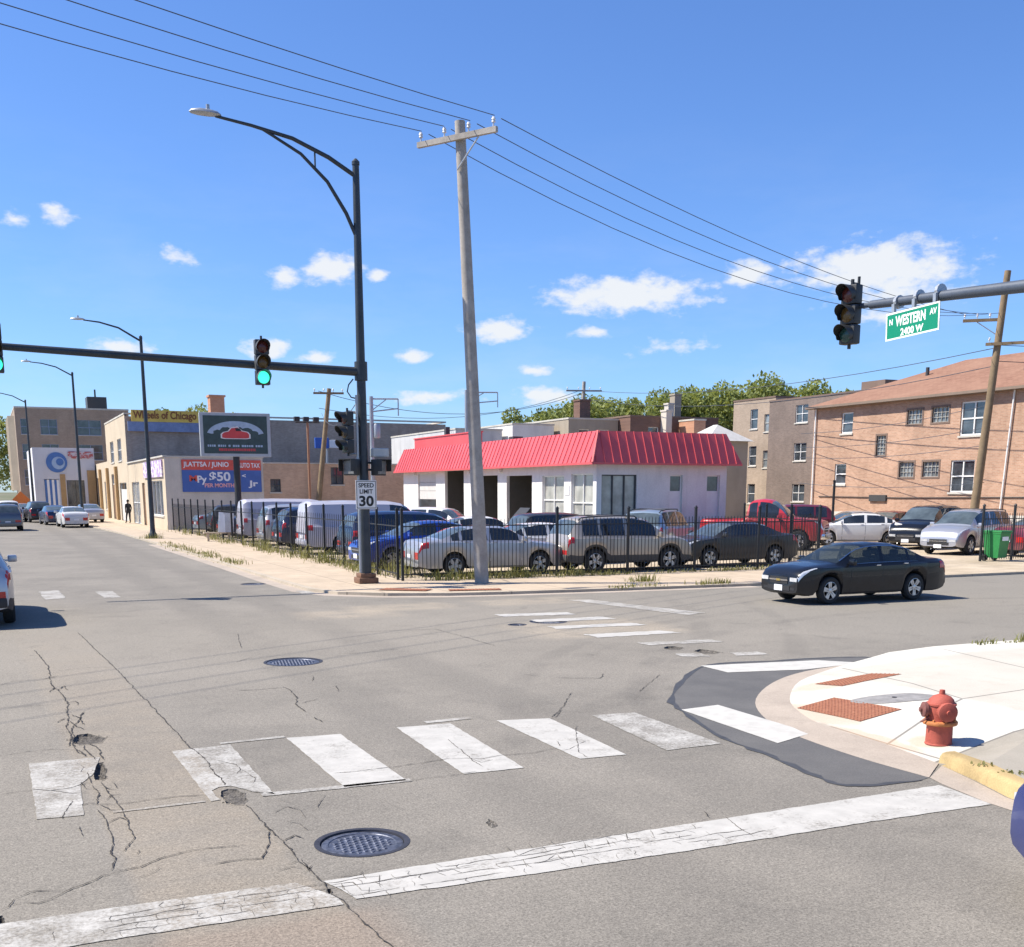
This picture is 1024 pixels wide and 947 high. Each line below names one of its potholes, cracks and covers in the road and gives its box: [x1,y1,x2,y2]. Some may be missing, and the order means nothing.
pothole [92,762,107,781]
crack [1,650,243,910]
manhole cover [314,828,410,858]
crack [525,674,603,756]
pothole [220,789,248,806]
pothole [66,733,107,745]
manhole cover [263,657,323,666]
